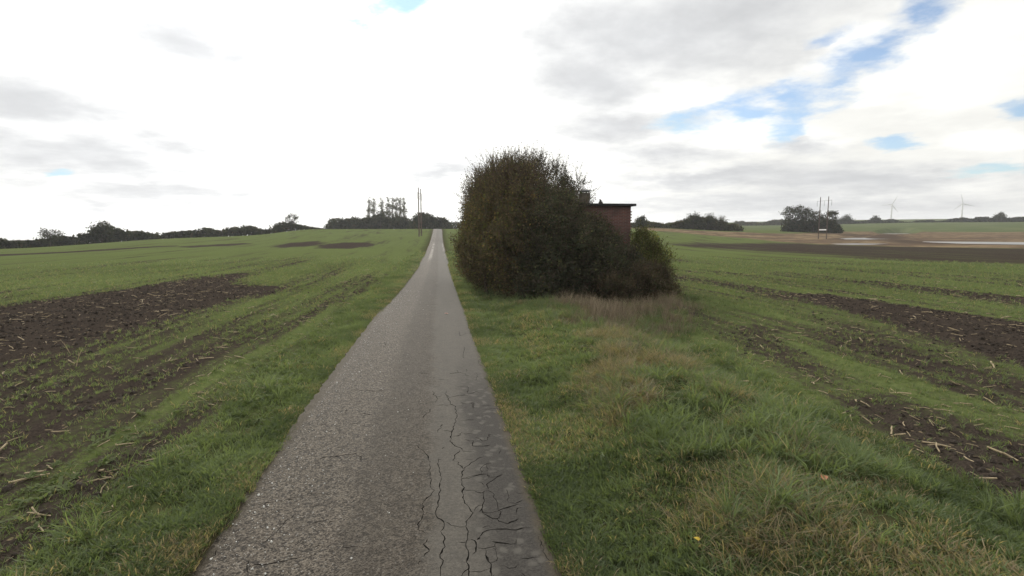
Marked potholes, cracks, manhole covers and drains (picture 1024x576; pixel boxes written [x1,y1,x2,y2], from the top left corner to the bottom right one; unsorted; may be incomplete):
crack [262,497,332,543]
crack [246,546,357,576]
crack [417,372,550,576]
